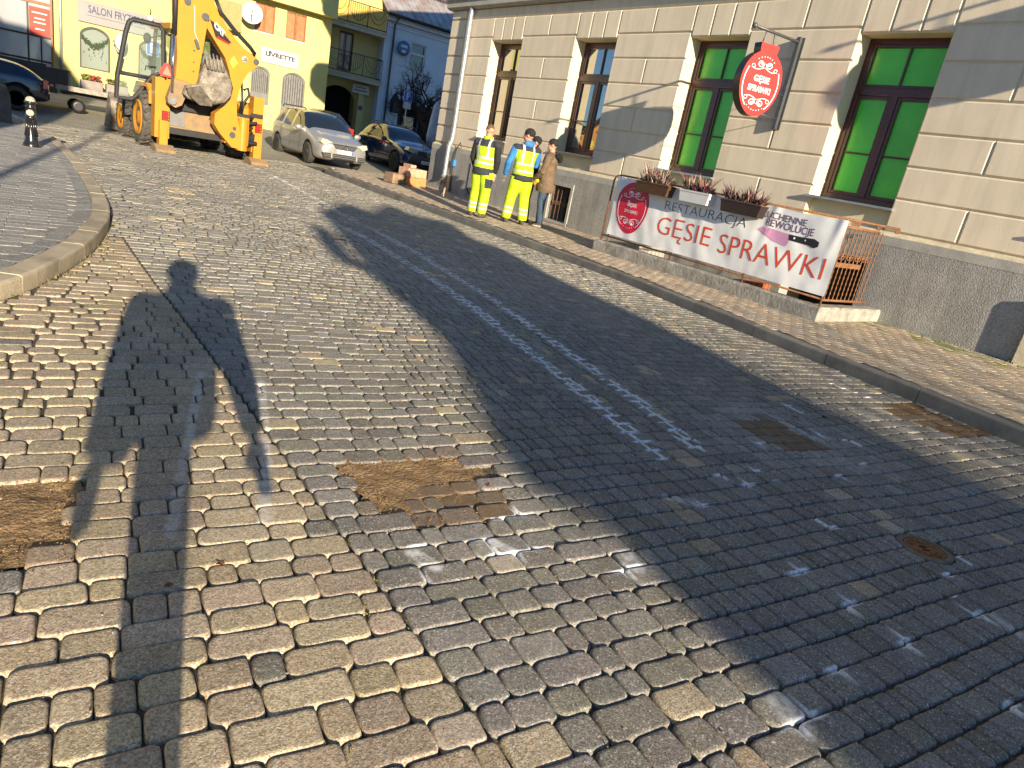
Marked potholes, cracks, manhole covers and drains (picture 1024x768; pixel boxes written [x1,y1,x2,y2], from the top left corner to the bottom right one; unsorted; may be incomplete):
pothole [0,476,85,571]
pothole [335,451,518,533]
manhole cover [895,534,954,565]
